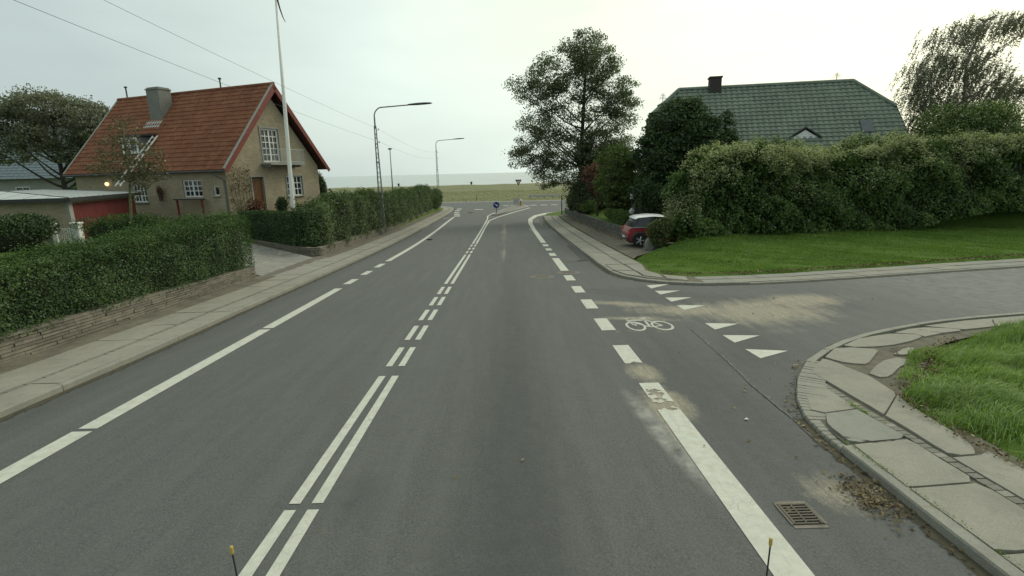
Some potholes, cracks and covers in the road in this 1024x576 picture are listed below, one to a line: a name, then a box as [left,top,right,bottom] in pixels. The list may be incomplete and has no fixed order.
drain grate [773,501,830,529]
